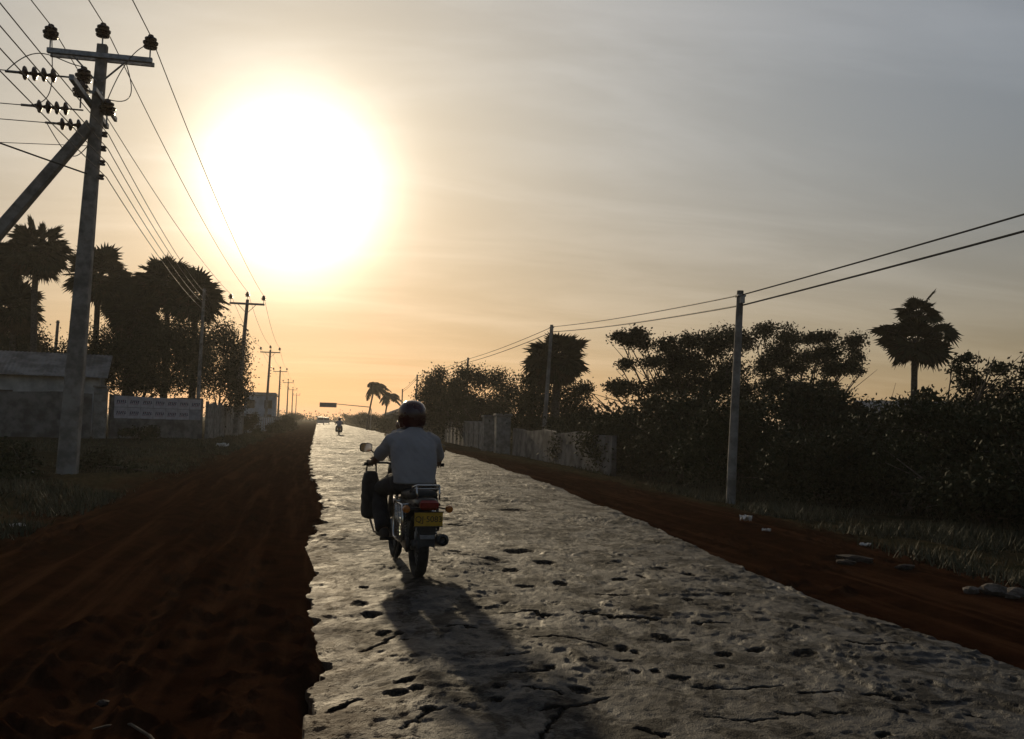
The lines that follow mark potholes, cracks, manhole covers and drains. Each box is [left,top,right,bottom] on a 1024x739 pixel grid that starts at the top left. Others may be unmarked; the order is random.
crack [705,712,847,723]
pothole [794,650,818,658]
crack [447,594,659,739]
pothole [383,689,409,697]
